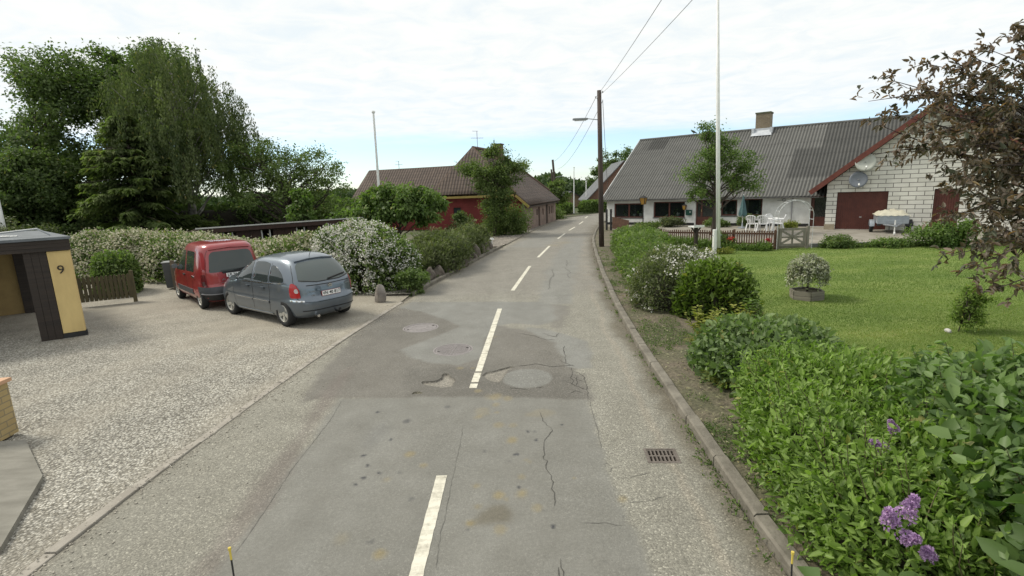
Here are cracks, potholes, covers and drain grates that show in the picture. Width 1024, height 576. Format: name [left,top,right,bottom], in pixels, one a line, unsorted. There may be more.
manhole cover [433,343,473,356]
manhole cover [403,323,439,333]
drain grate [643,448,682,463]
crack [522,333,589,395]
pothole [421,373,456,388]
crack [540,413,556,506]
